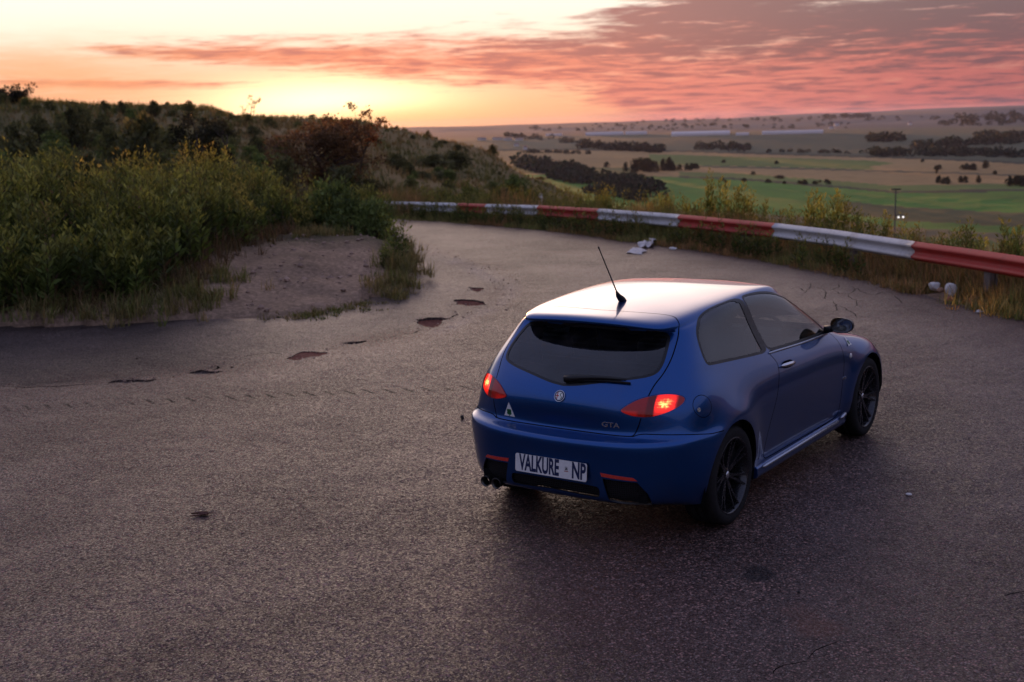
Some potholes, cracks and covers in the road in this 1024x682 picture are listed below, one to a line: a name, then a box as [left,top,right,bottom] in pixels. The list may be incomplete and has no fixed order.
pothole [416,317,448,327]
crack [773,641,838,674]
pothole [286,351,327,360]
crack [793,283,902,317]
